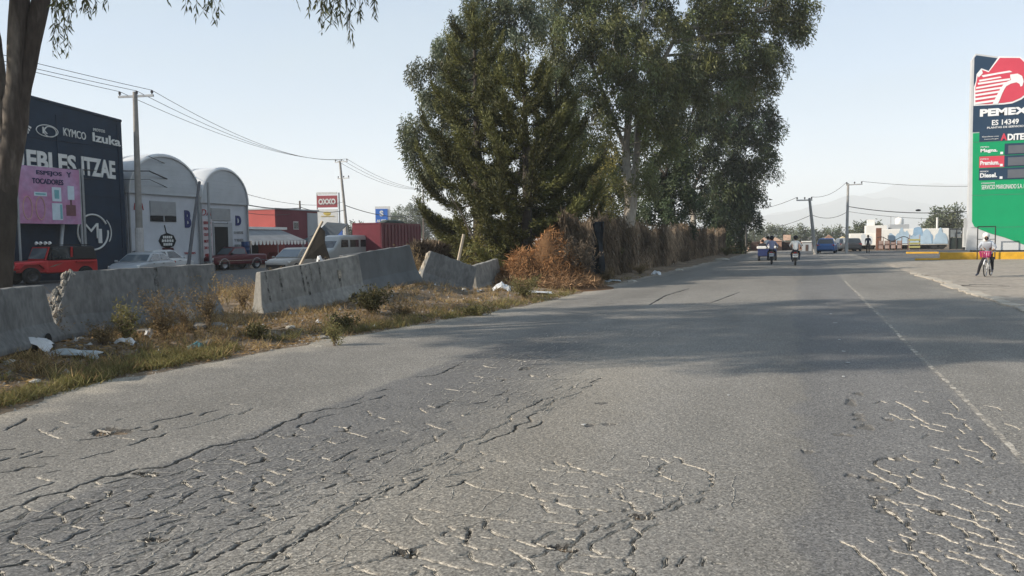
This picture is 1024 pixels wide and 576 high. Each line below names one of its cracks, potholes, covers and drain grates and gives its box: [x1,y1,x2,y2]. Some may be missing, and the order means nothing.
crack [0,328,1024,576]
pothole [89,427,132,436]
